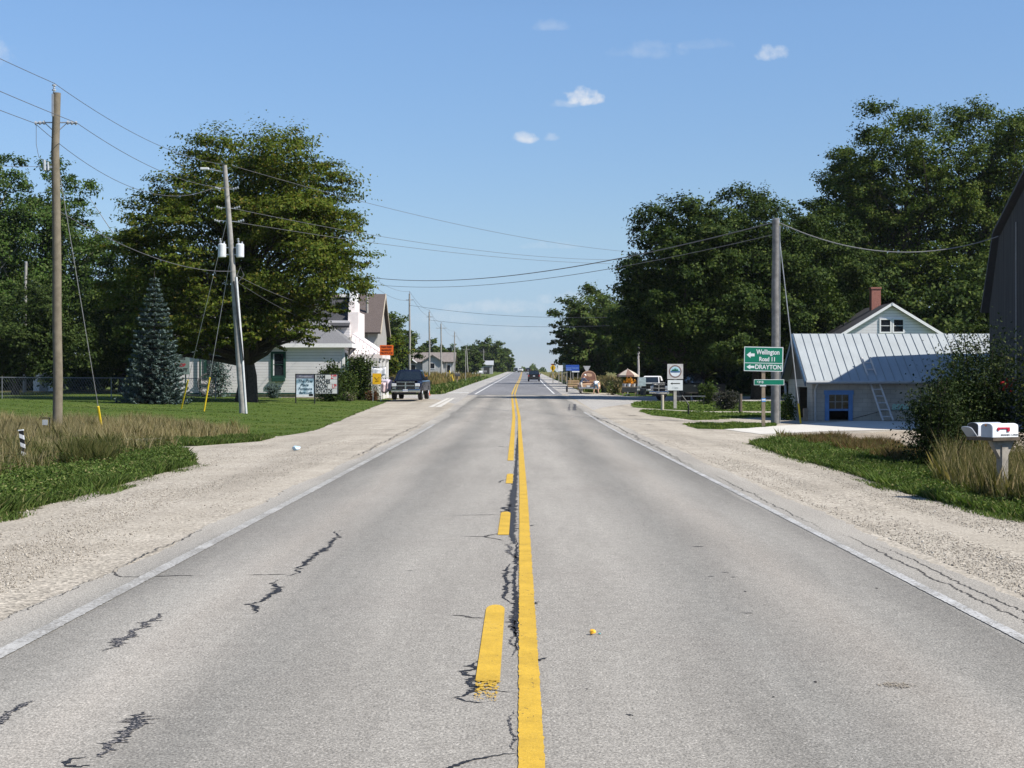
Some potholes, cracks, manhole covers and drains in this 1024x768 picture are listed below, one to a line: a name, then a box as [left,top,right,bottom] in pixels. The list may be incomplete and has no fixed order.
crack [102,613,163,651]
crack [452,661,508,703]
crack [113,532,196,577]
crack [246,529,346,614]
crack [858,540,1024,620]
crack [474,533,519,656]
crack [62,712,157,767]
crack [446,711,517,768]
crack [0,700,35,724]
